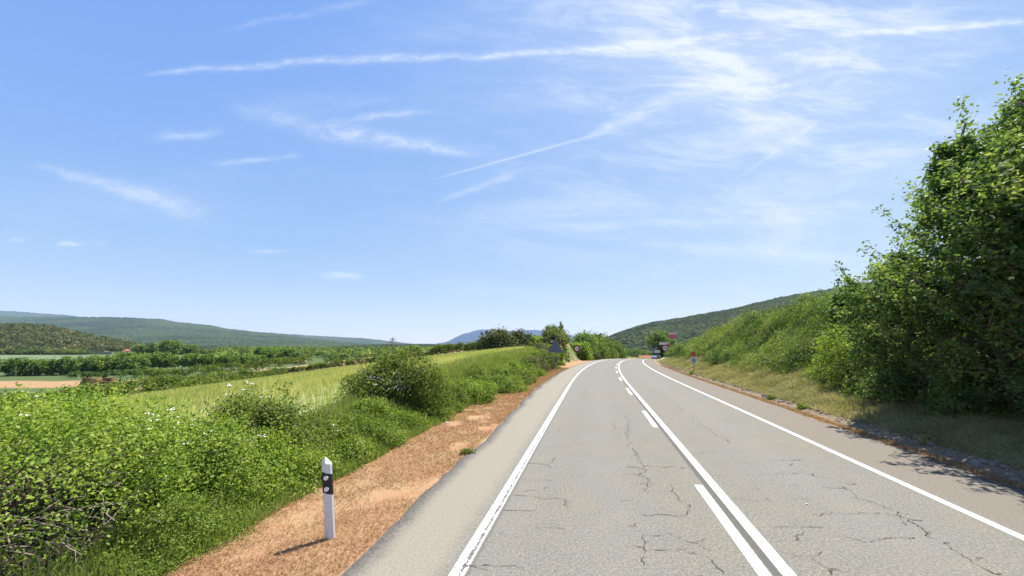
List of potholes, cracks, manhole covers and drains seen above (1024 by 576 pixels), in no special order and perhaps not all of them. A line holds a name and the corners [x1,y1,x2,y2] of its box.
crack [721,459,936,574]
crack [582,407,724,575]
